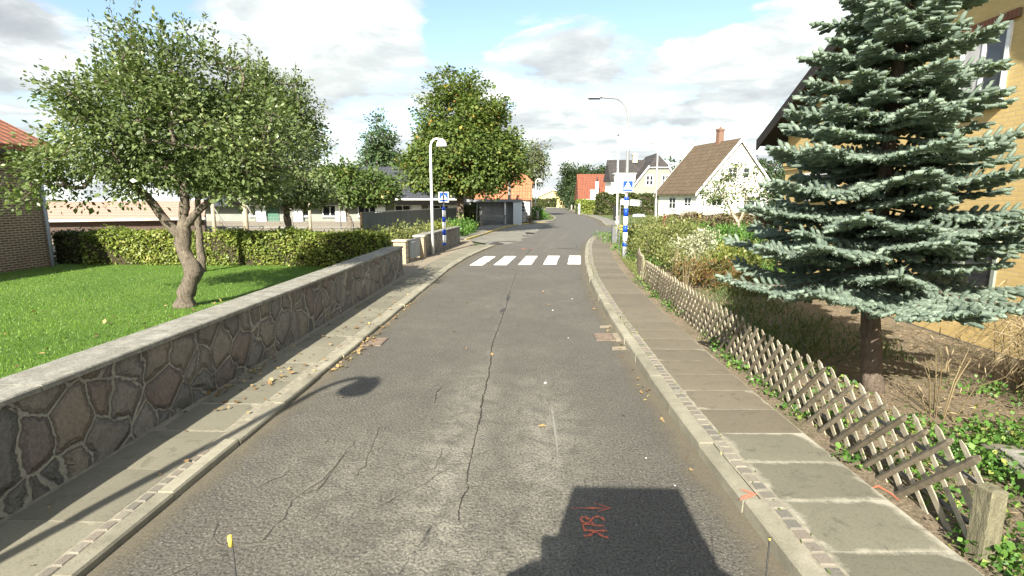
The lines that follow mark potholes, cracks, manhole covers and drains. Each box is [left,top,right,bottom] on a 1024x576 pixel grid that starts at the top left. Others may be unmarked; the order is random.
crack [169,273,517,576]
